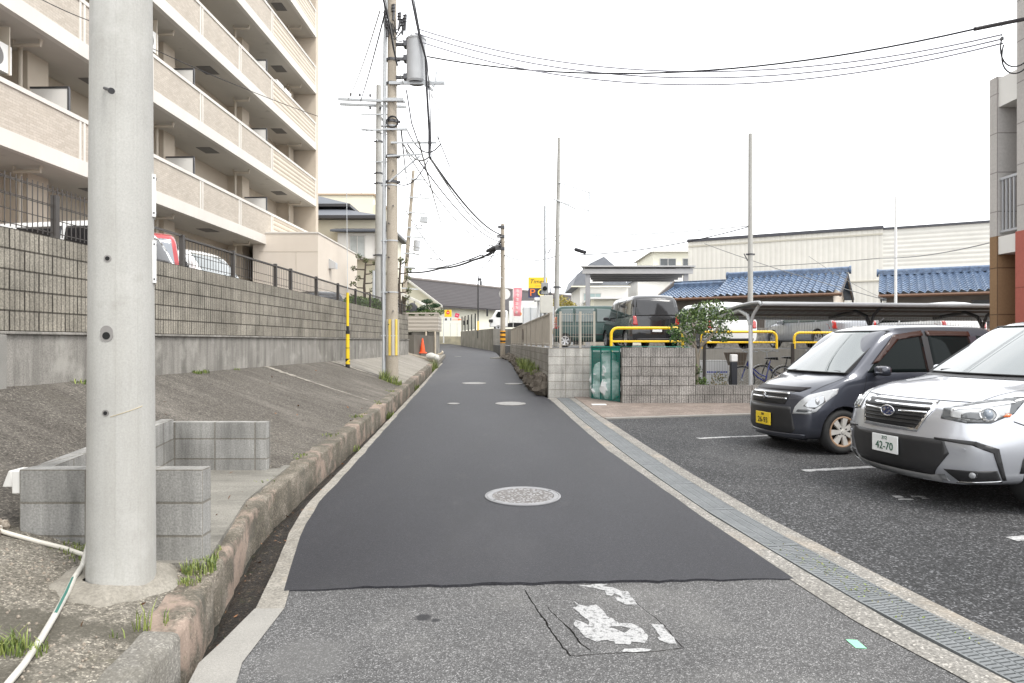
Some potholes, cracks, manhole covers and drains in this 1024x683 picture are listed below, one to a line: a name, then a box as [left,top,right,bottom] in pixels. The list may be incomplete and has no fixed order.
drain grate [858,597,1024,683]
drain grate [705,509,798,547]
manhole cover [485,486,561,506]
drain grate [640,464,692,484]
drain grate [765,544,897,602]
drain grate [667,483,735,510]
crack [524,589,684,656]
drain grate [619,449,662,465]
